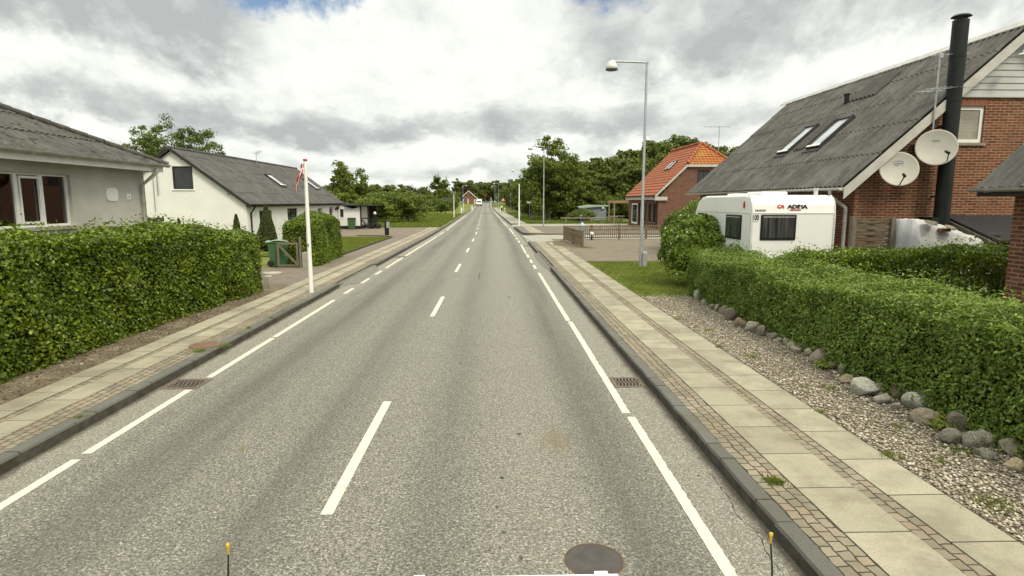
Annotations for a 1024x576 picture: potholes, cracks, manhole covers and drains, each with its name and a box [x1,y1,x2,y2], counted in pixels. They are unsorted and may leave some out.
crack [710,474,783,573]
drain grate [160,379,212,389]
manhole cover [189,341,223,349]
manhole cover [564,543,625,574]
drain grate [609,377,647,388]
